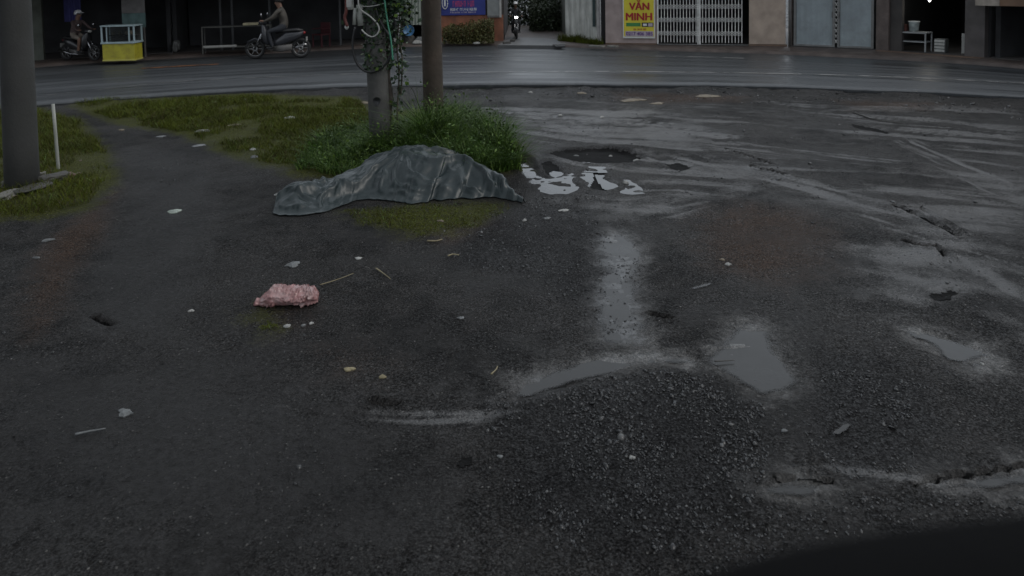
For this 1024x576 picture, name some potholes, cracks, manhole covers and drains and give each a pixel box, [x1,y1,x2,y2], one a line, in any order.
crack [894,206,968,257]
crack [772,476,834,485]
pothole [550,148,642,163]
crack [914,467,1015,487]
pothole [930,290,958,300]
pothole [665,163,690,171]
